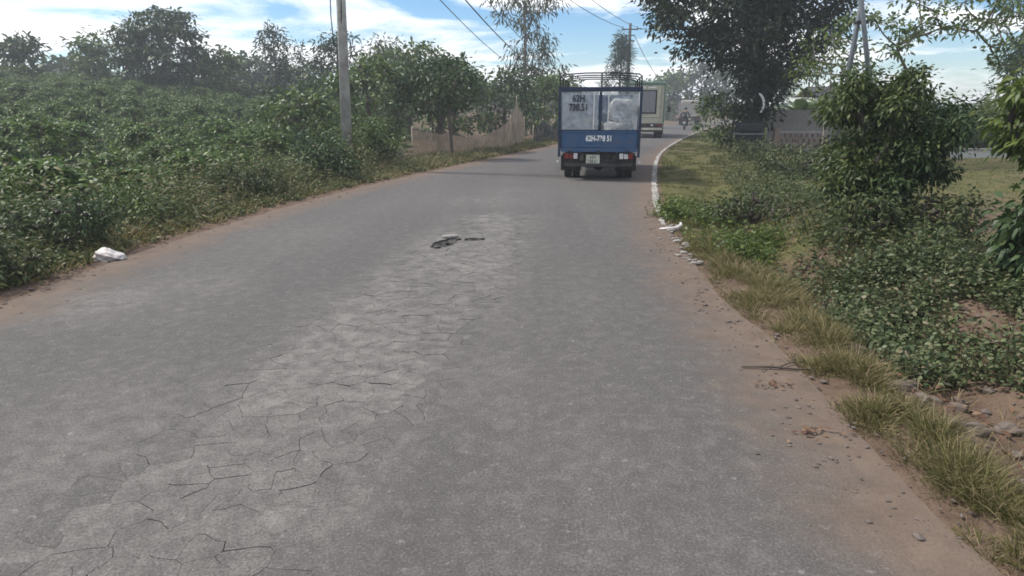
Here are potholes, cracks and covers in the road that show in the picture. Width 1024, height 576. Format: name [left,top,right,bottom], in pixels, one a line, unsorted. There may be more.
pothole [430,234,461,249]
crack [72,244,512,572]
